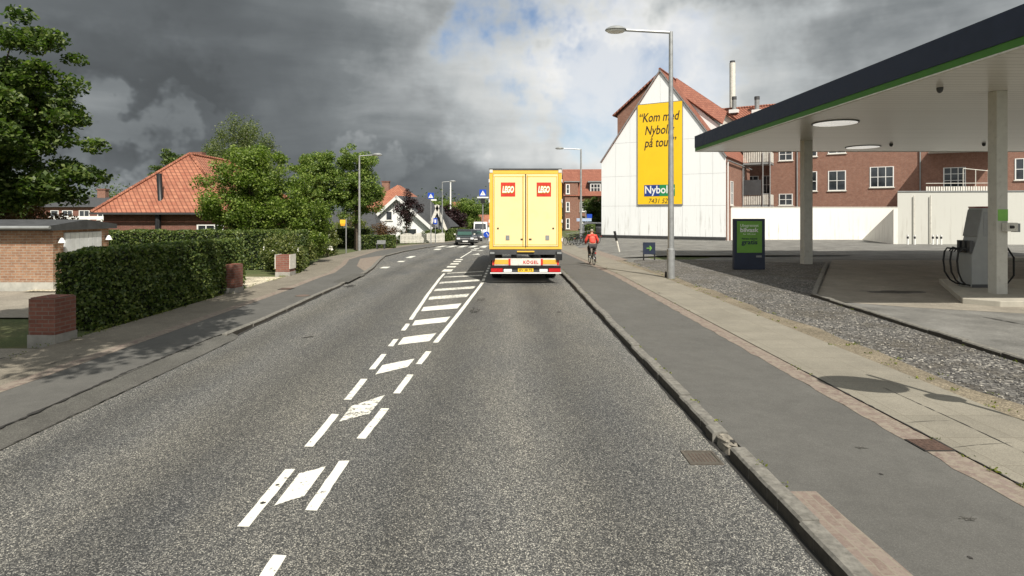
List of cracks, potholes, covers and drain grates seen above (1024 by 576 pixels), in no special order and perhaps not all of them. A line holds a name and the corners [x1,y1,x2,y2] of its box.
manhole cover [904,439,956,452]
drain grate [680,450,724,465]
